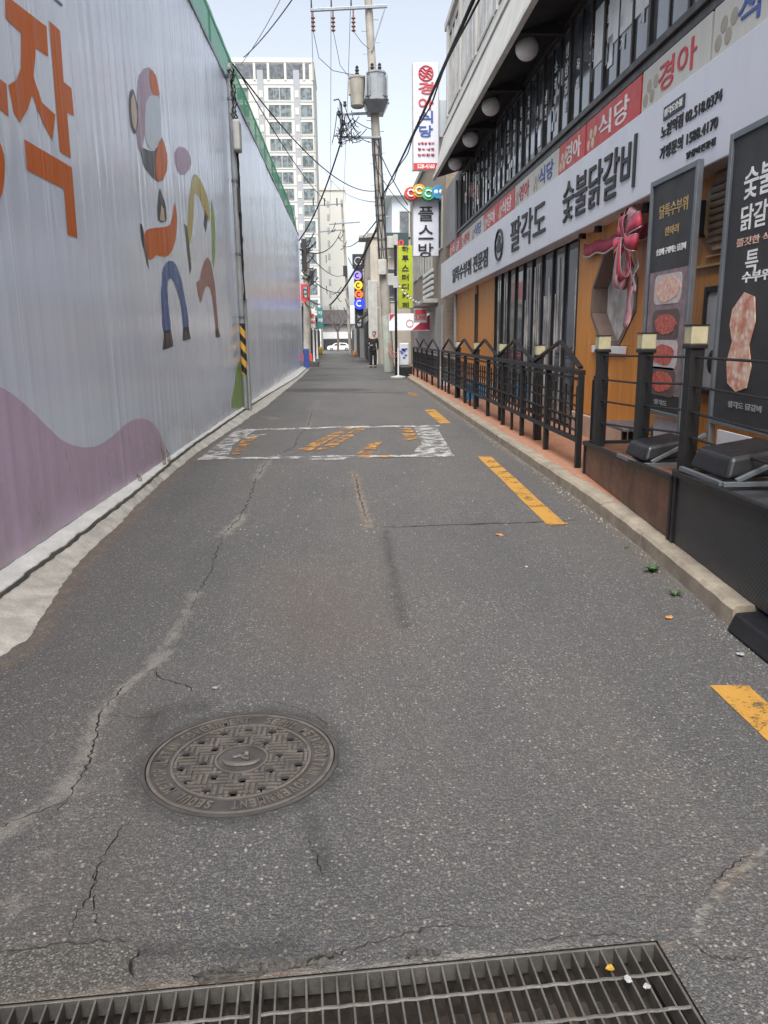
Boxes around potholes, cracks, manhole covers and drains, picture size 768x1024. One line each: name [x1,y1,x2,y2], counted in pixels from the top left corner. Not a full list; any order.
crack [0,409,314,829]
drain grate [258,942,704,1024]
crack [704,854,752,897]
drain grate [0,981,256,1024]
crack [686,940,760,961]
crack [0,819,140,978]
manhole cover [140,712,339,818]
